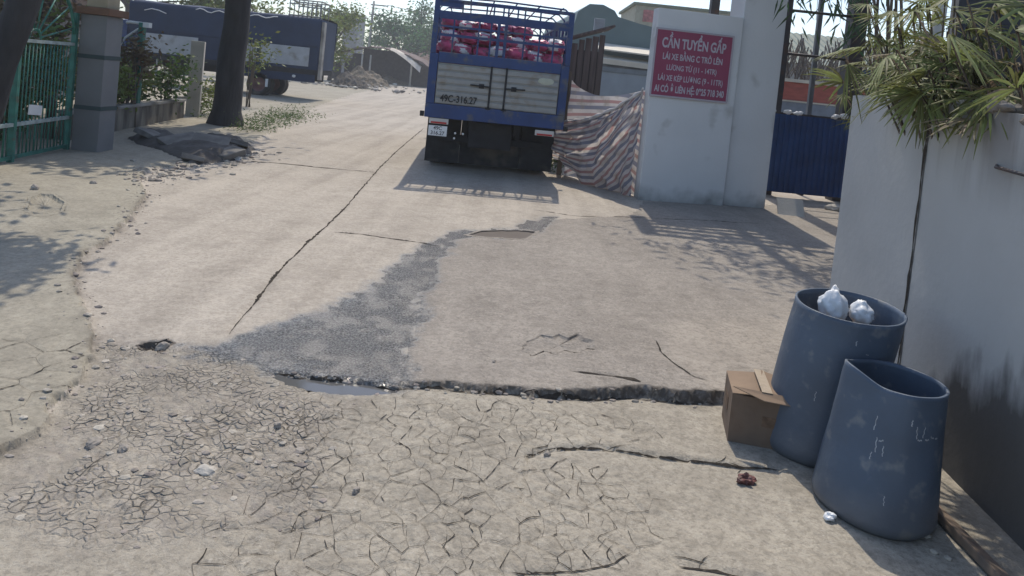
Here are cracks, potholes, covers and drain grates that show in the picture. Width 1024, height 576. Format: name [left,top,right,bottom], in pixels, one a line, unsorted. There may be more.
crack [656,341,705,380]
pothole [135,338,176,353]
pothole [464,230,540,240]
crack [192,395,776,576]
